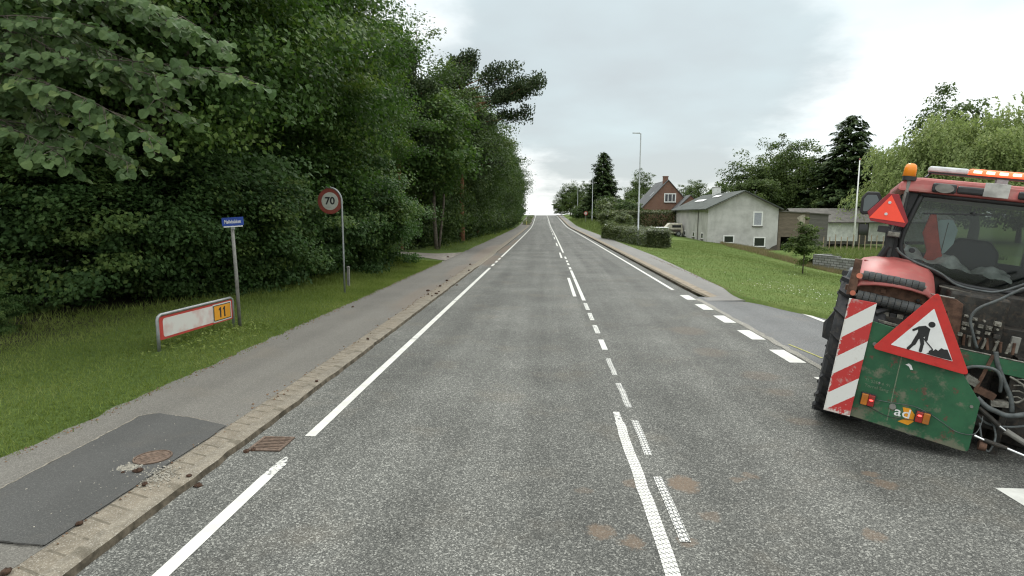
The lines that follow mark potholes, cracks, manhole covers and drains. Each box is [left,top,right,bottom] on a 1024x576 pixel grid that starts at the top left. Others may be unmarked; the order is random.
drain grate [248,436,295,452]
manhole cover [132,450,173,465]
